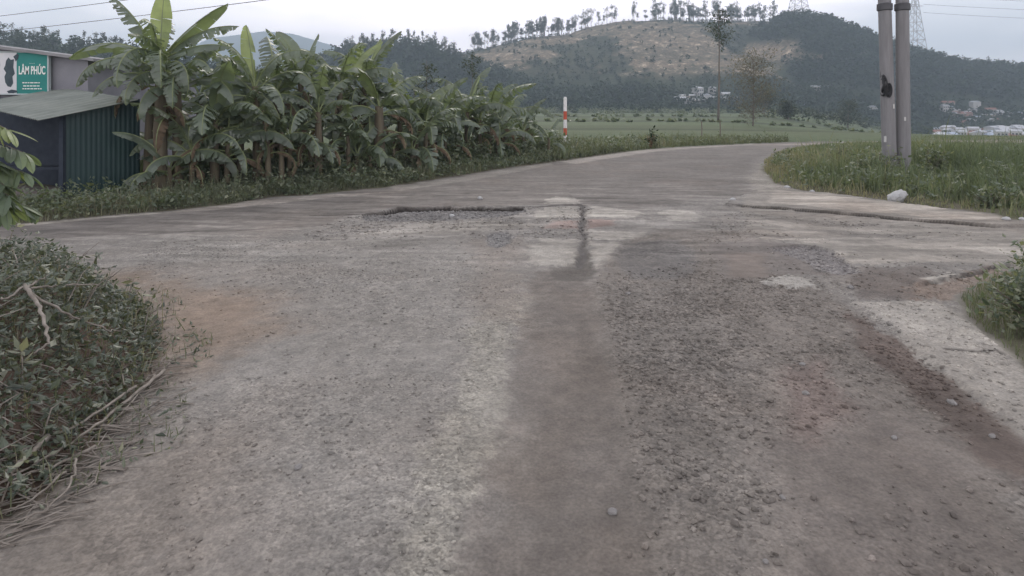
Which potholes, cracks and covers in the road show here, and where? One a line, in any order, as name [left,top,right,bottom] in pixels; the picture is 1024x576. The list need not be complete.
crack [531,203,621,270]
pothole [359,206,527,222]
